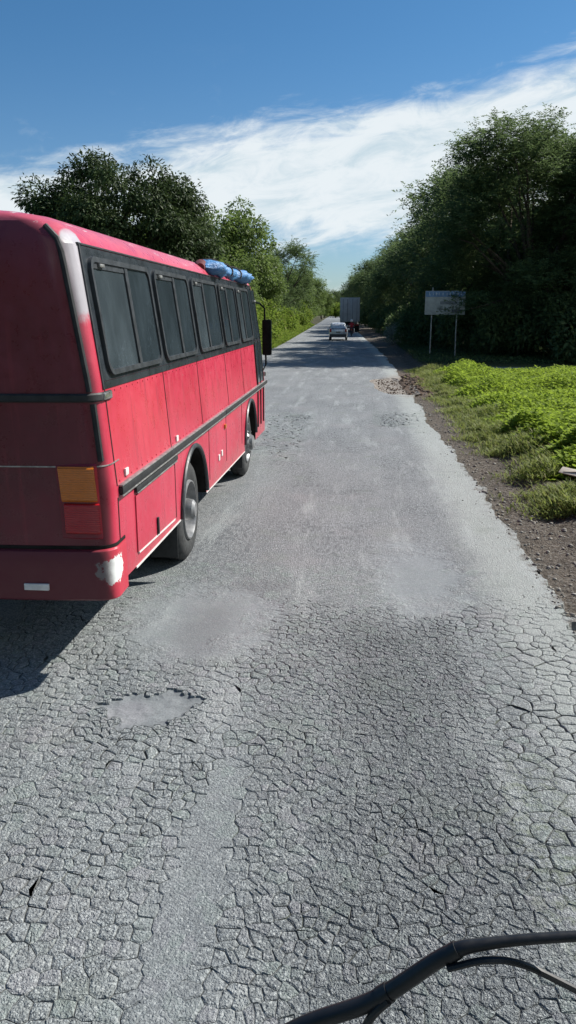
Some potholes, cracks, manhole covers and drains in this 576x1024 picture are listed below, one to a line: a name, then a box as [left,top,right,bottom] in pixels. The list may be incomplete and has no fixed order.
crack [190,596,576,1024]
crack [0,575,289,1024]
pothole [95,690,204,732]
